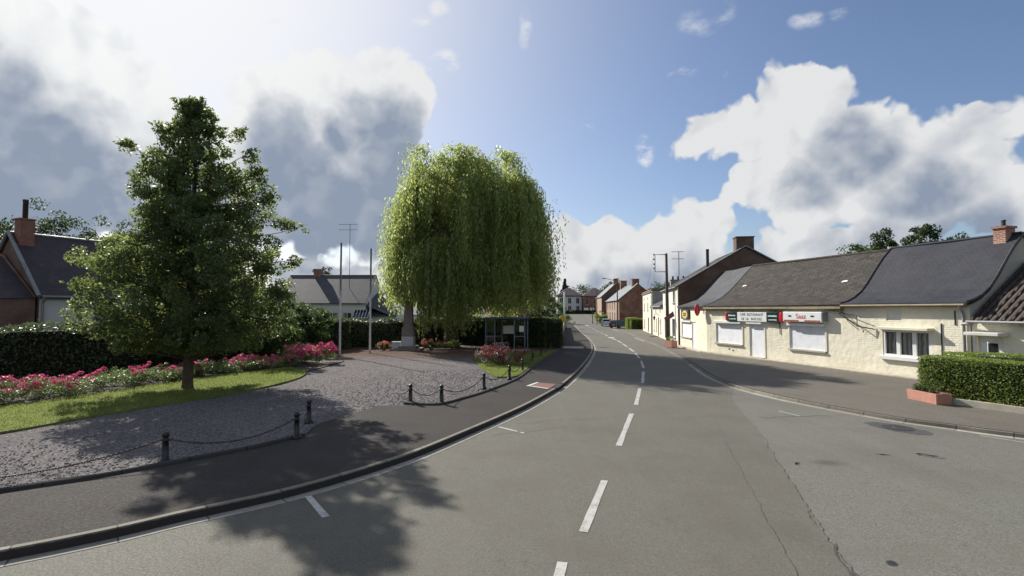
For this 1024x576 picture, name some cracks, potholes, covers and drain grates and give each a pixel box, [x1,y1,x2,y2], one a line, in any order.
manhole cover [864,422,933,435]
crack [722,433,798,576]
